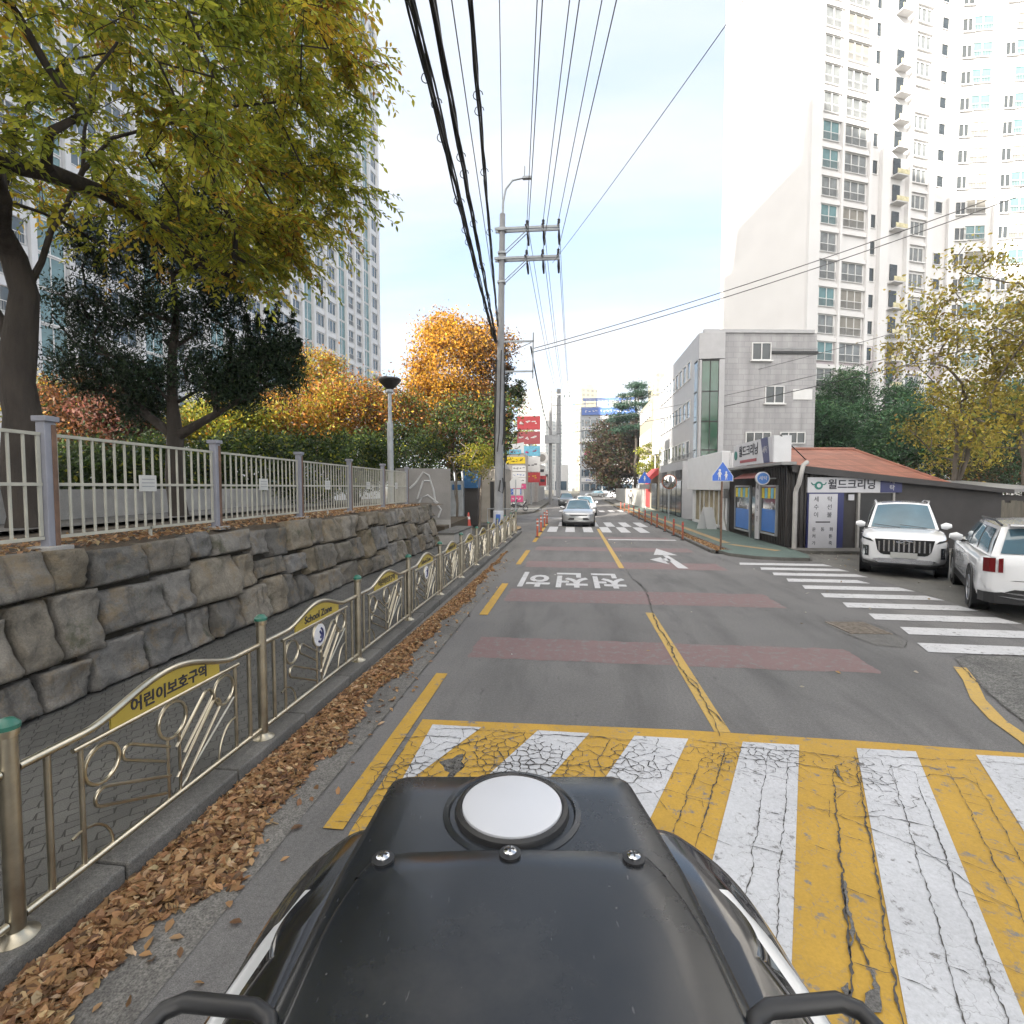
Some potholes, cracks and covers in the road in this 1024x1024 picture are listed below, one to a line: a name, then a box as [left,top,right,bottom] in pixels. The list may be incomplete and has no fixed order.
crack [626,569,1016,1024]
pothole [439,754,465,777]
crack [341,726,704,831]
